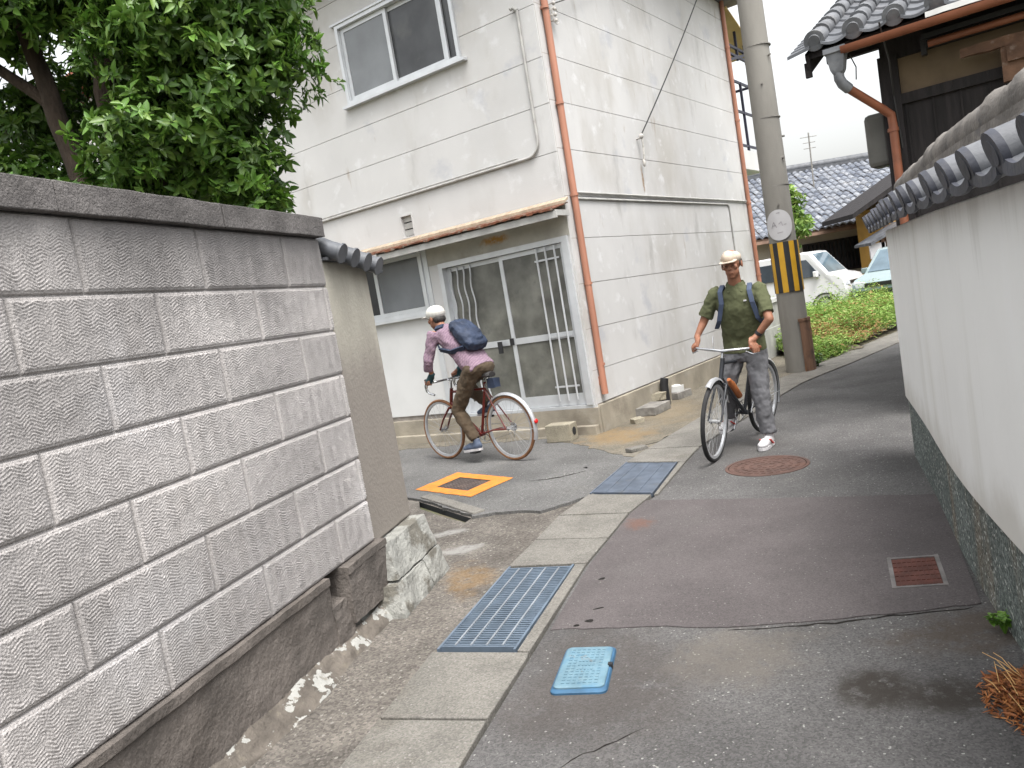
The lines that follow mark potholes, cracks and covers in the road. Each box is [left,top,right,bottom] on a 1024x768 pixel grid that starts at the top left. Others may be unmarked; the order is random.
utility cover [415,472,512,497]
utility cover [887,554,949,589]
crack [561,728,643,768]
drain grate [437,564,574,652]
drain grate [590,462,678,497]
manhole cover [725,455,810,477]
